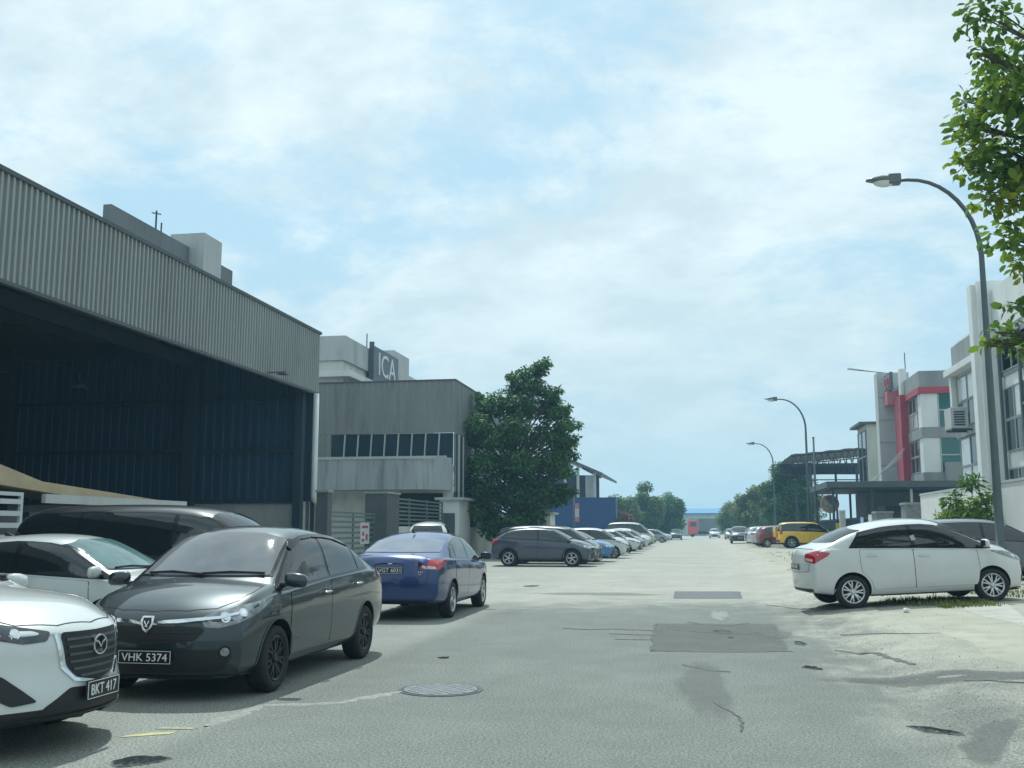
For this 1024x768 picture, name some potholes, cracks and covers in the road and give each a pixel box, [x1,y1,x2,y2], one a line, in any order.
crack [835,633,932,665]
crack [713,702,744,732]
manhole cover [398,683,483,697]
crack [563,622,793,672]
pothole [111,755,173,768]
pothole [907,725,964,735]
